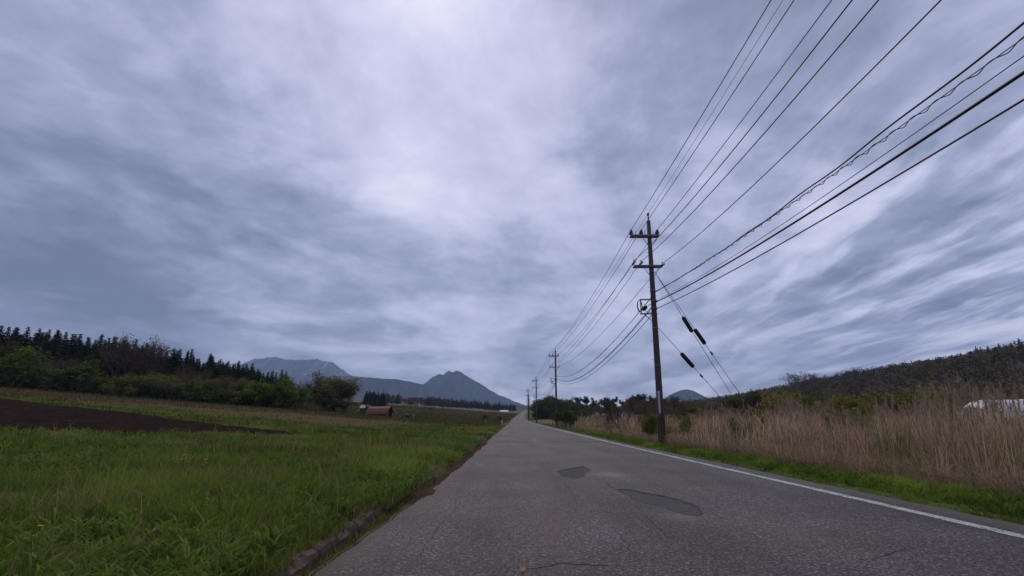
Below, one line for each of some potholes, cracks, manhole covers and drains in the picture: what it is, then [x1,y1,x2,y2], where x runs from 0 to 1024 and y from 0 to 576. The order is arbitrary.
crack [529,530,634,569]
